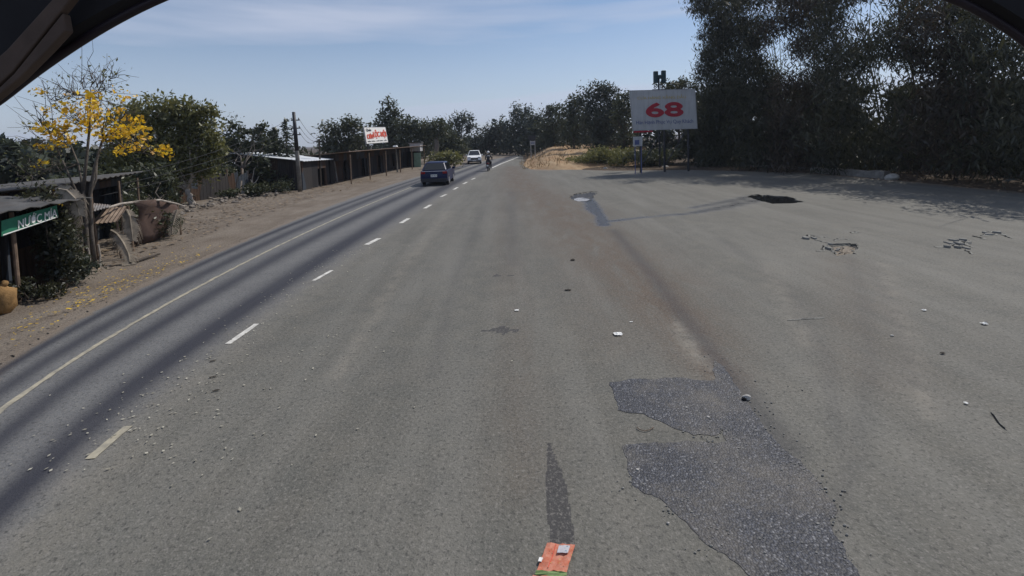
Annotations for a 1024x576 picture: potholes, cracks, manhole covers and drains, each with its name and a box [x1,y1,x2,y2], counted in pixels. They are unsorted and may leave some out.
pothole [825,242,863,257]
pothole [745,194,806,204]
